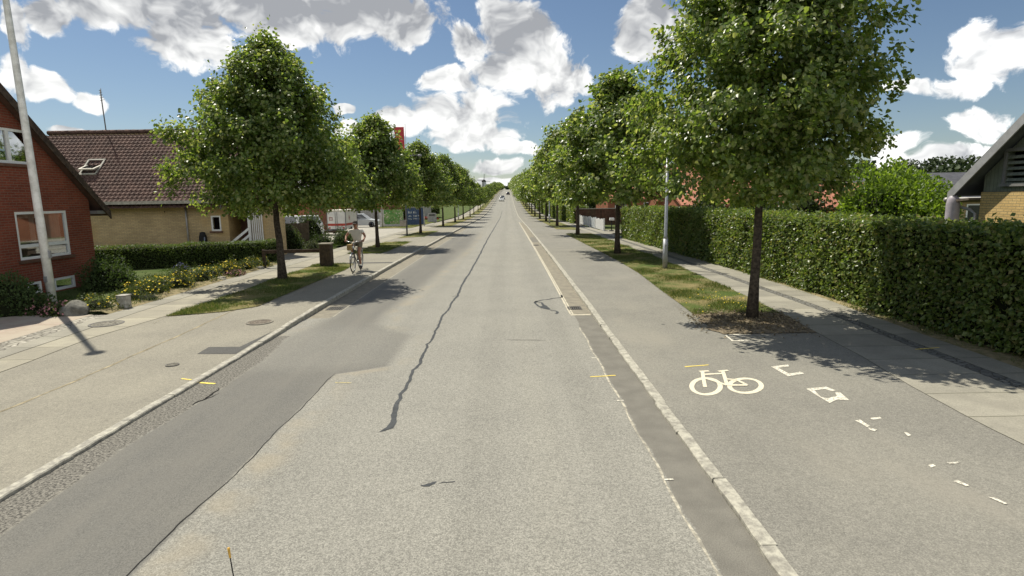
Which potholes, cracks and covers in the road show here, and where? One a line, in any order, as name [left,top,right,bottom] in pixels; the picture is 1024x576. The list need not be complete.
manhole cover [88,320,125,328]
